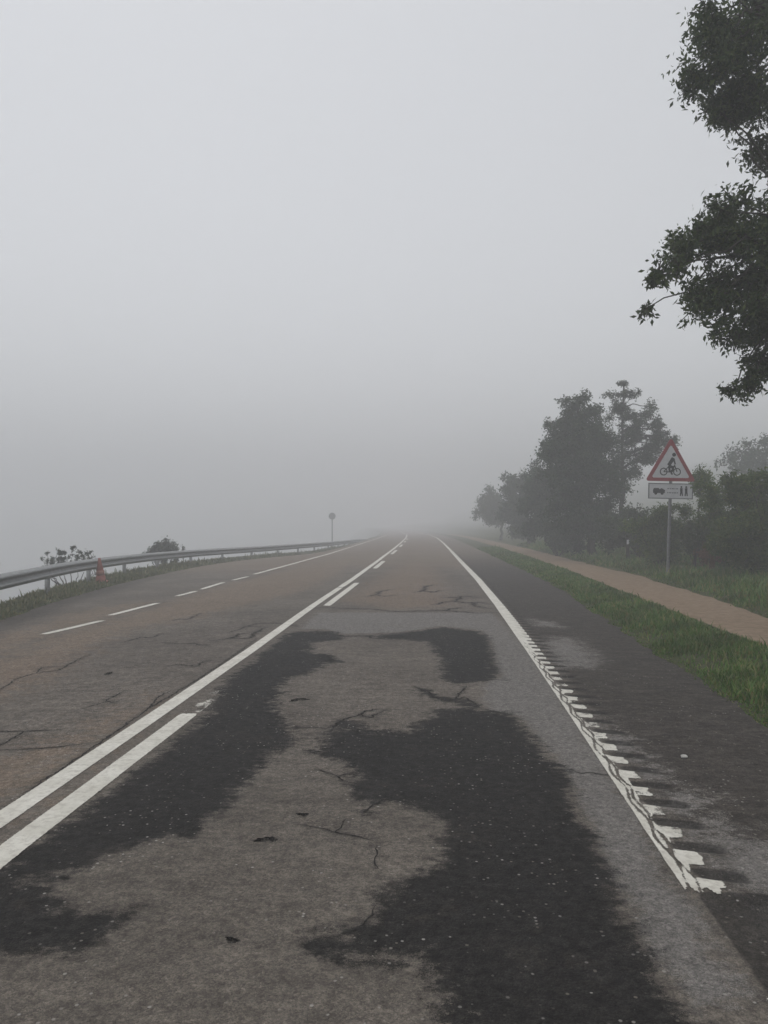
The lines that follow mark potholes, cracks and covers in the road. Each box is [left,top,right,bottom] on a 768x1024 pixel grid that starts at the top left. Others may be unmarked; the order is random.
crack [298,820,379,869]
crack [363,788,405,812]
crack [418,686,482,709]
crack [308,709,383,733]
crack [332,585,489,613]
crack [307,744,391,780]
